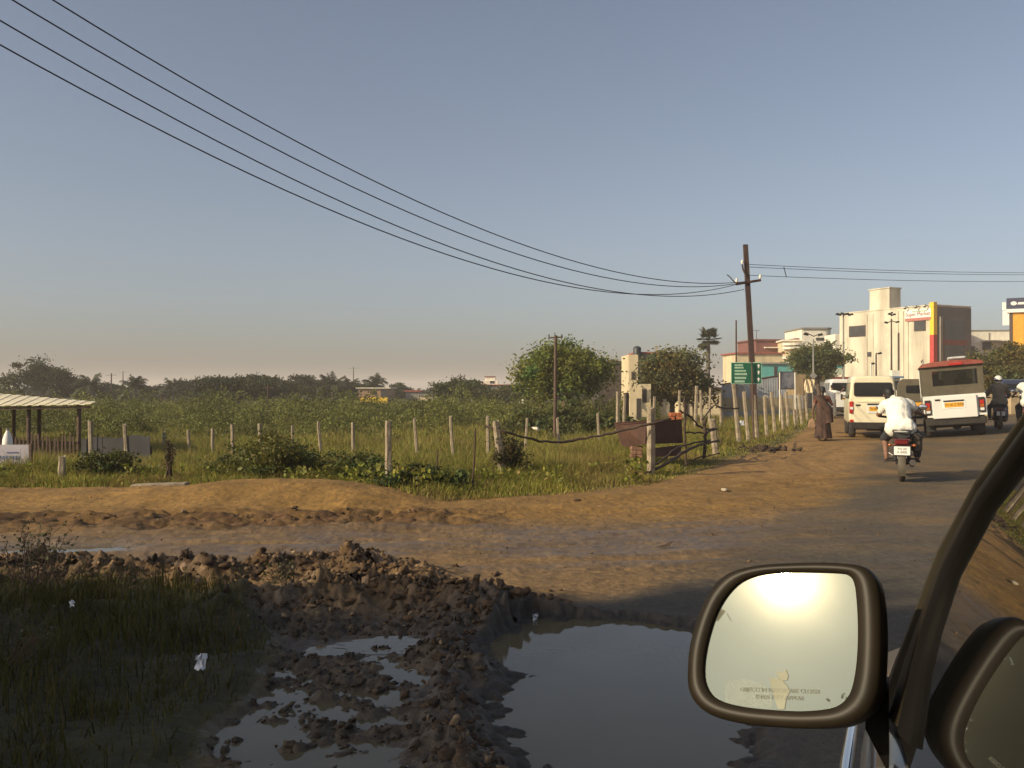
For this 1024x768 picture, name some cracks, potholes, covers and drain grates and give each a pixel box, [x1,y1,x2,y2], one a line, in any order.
pothole [458,584,793,768]
